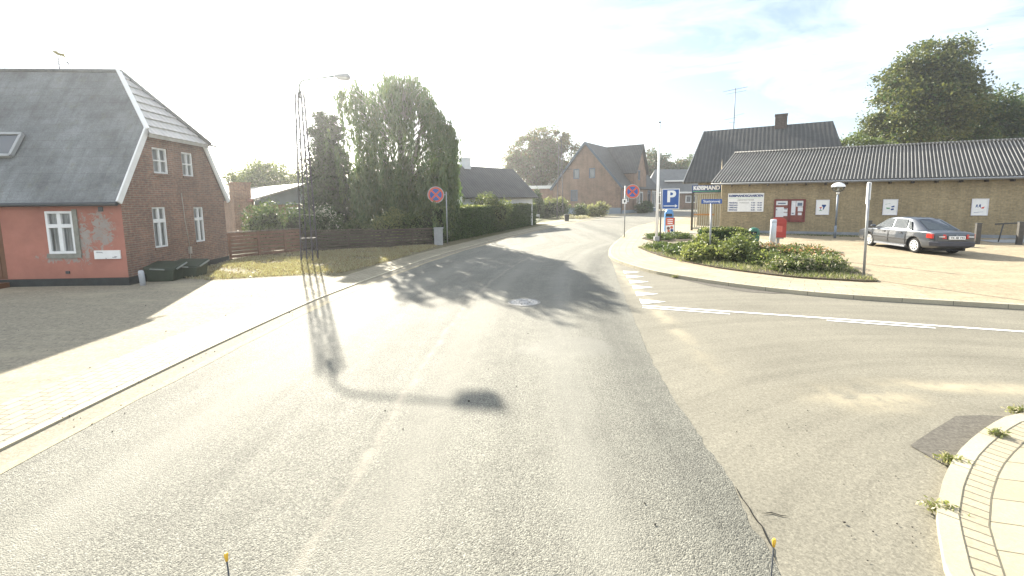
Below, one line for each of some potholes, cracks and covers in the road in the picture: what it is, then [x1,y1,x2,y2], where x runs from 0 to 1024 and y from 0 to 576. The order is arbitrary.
manhole cover [508,298,541,306]
